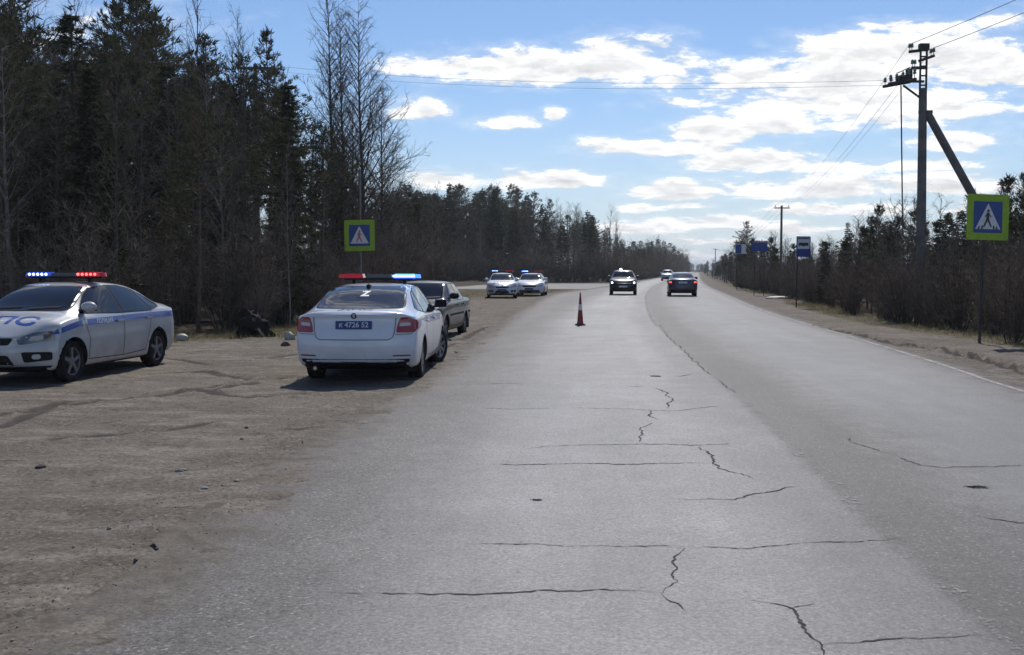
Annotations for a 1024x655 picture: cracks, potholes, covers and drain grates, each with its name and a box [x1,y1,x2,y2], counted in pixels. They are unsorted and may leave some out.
crack [748,599,988,655]
crack [684,486,796,500]
crack [488,374,754,479]
crack [846,433,1018,468]
crack [328,538,899,611]
